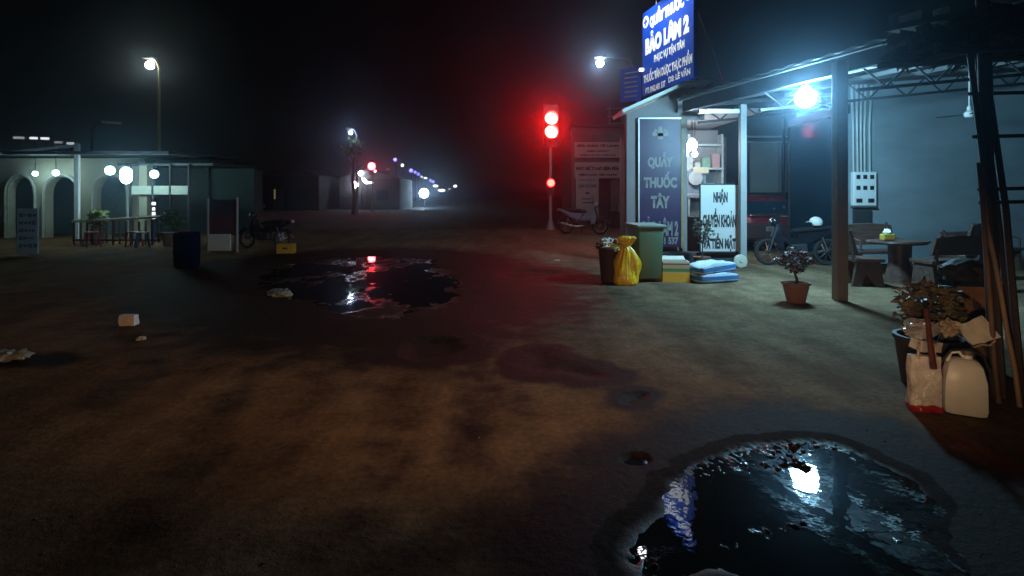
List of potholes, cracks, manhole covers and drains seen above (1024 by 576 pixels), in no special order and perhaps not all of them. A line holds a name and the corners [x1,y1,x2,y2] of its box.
pothole [215,253,508,330]
pothole [590,430,971,576]
